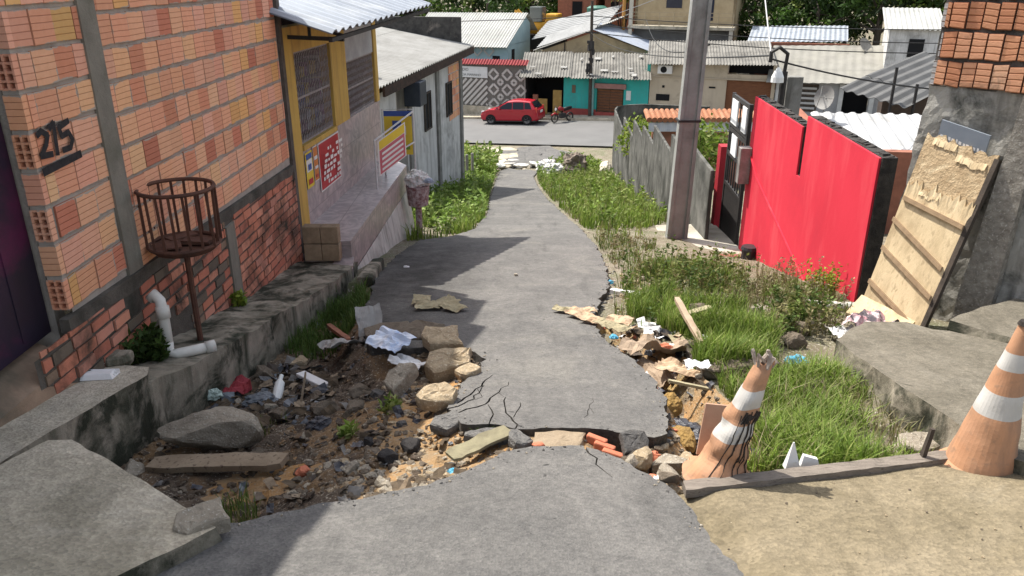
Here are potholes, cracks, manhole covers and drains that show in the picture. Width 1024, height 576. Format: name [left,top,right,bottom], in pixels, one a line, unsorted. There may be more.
pothole [120,321,508,520]
